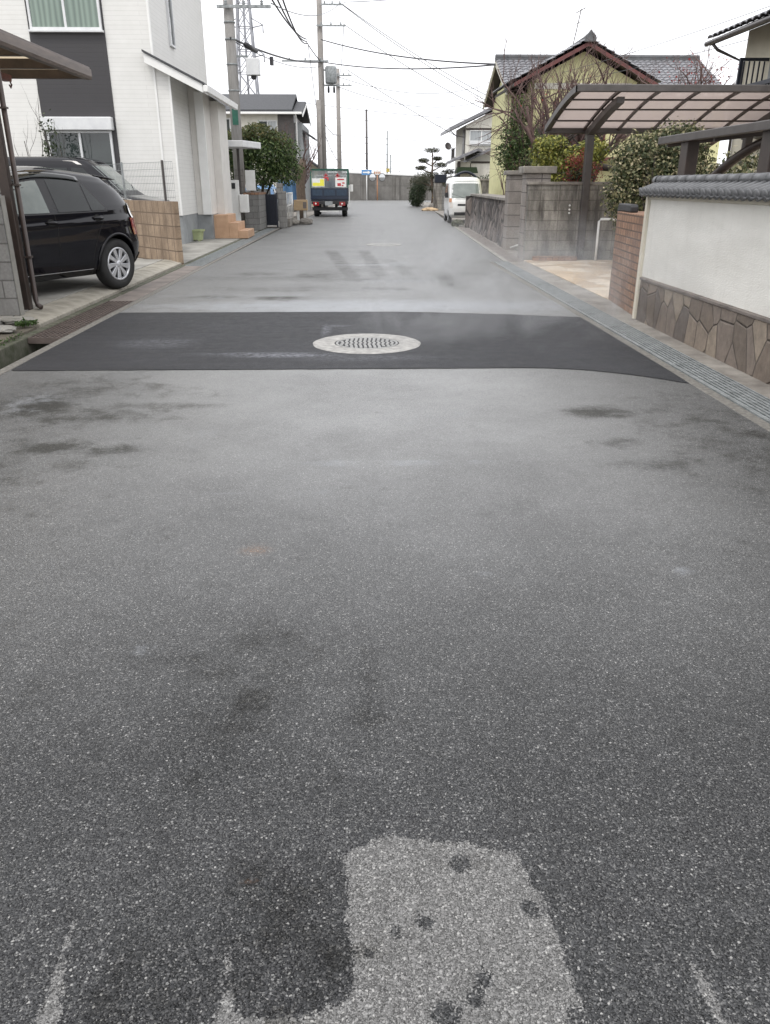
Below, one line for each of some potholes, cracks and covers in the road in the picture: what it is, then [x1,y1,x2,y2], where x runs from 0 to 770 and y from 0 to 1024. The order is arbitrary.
drain grate [669,363,770,424]
drain grate [494,261,525,272]
drain grate [533,284,582,302]
drain grate [562,301,630,326]
manhole cover [313,334,421,354]
drain grate [511,271,550,285]
drain grate [27,301,133,344]
drain grate [604,326,701,364]
